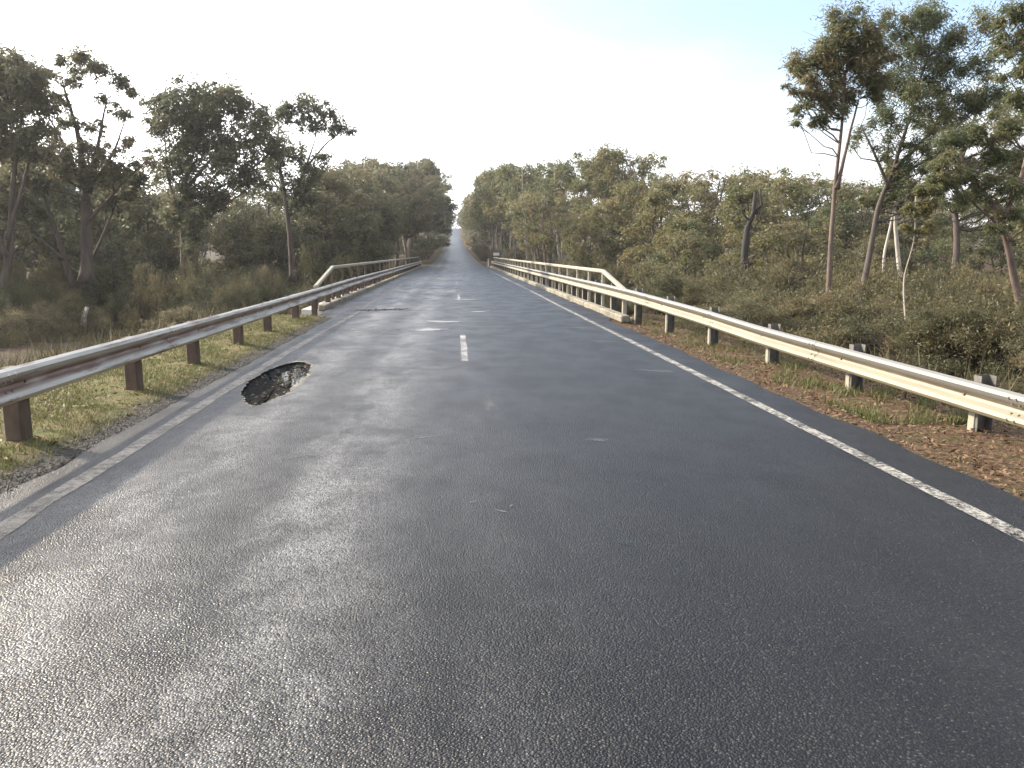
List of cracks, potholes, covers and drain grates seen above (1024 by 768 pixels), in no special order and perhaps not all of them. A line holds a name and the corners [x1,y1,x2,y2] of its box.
pothole [239,361,313,406]
